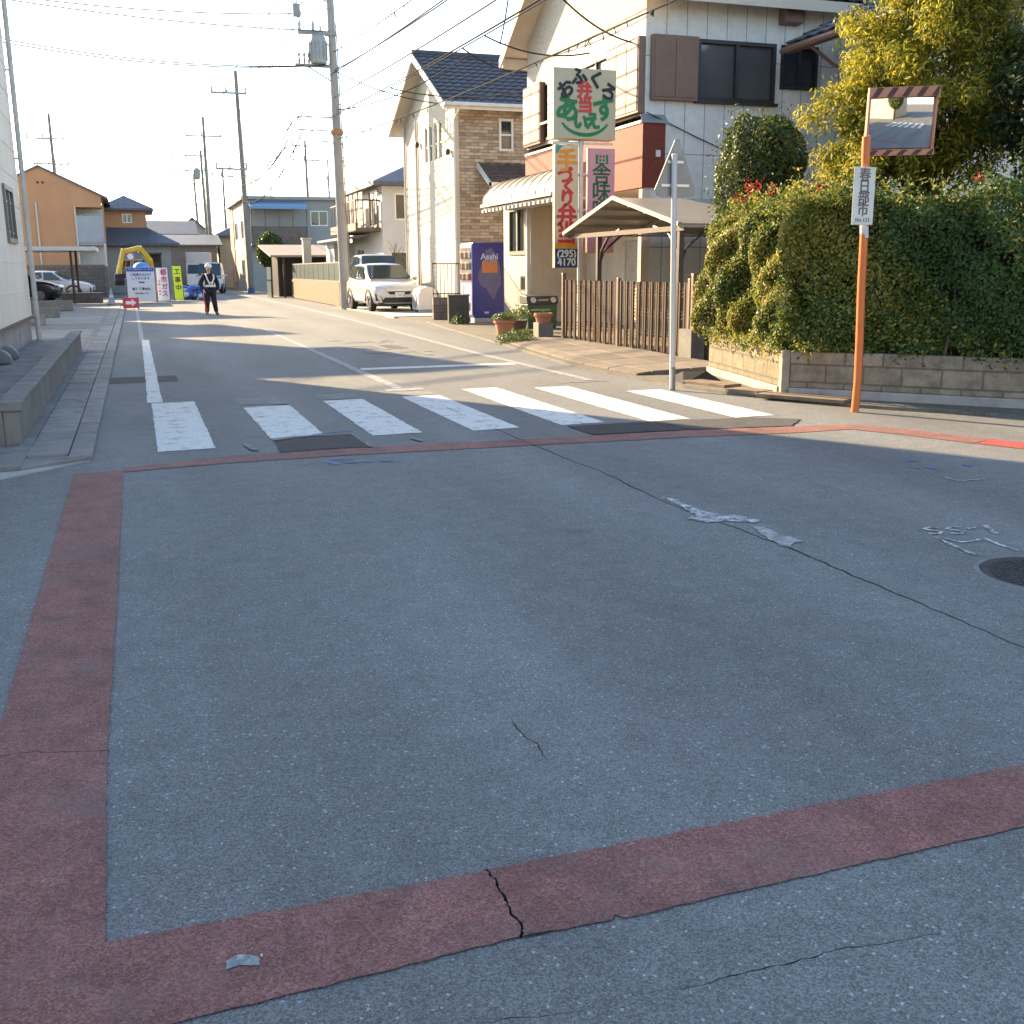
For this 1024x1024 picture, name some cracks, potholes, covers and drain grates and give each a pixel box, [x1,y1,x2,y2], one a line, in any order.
crack [485,931,946,1023]
crack [485,869,558,939]
crack [511,718,549,761]
manhole cover [974,555,1024,588]
